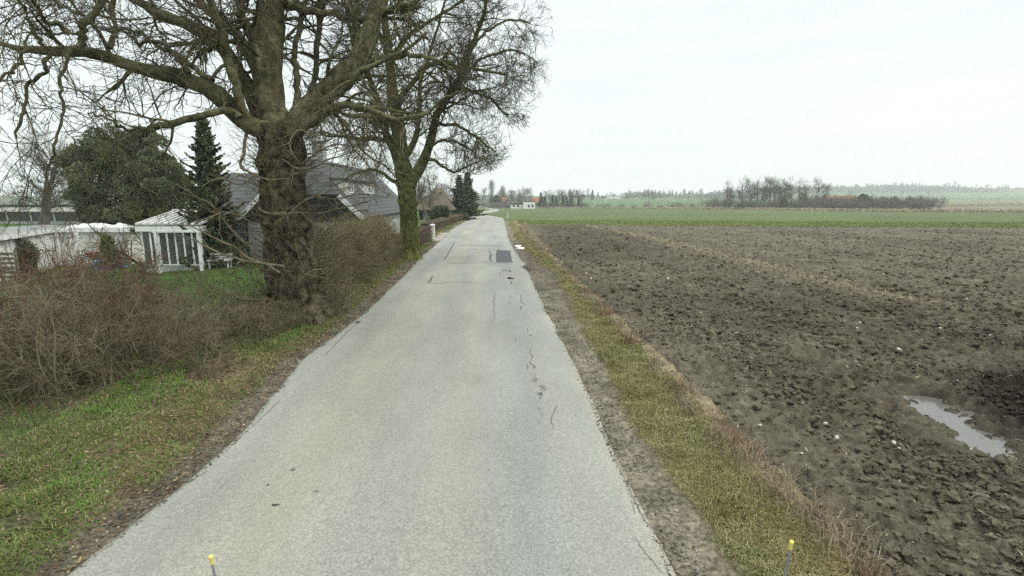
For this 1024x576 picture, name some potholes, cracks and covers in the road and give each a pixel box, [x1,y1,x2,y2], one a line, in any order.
crack [515,329,557,428]
